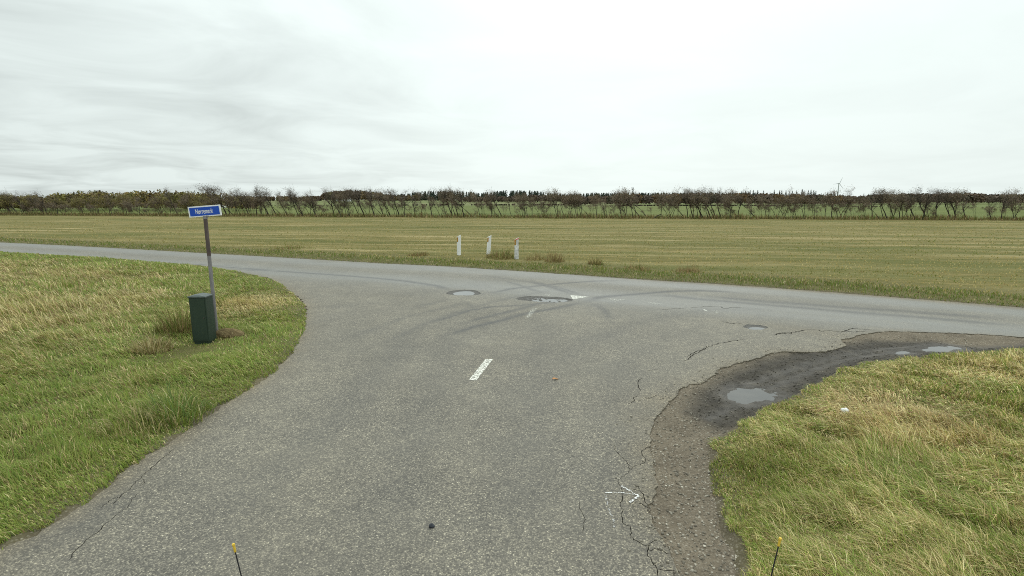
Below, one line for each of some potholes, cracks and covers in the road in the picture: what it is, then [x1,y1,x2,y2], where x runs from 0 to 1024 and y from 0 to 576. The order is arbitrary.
crack [614,445,674,576]
crack [70,450,172,559]
crack [663,306,740,361]
